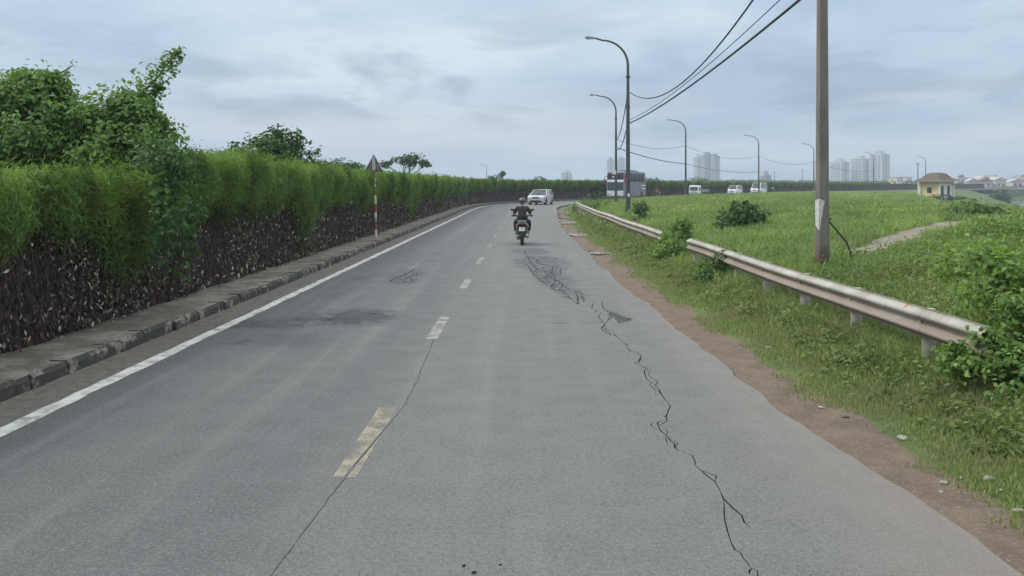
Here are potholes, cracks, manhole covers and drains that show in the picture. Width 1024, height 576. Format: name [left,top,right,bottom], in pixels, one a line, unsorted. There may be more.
crack [592,301,759,576]
pothole [609,313,632,323]
crack [523,251,585,305]
crack [271,340,434,576]
